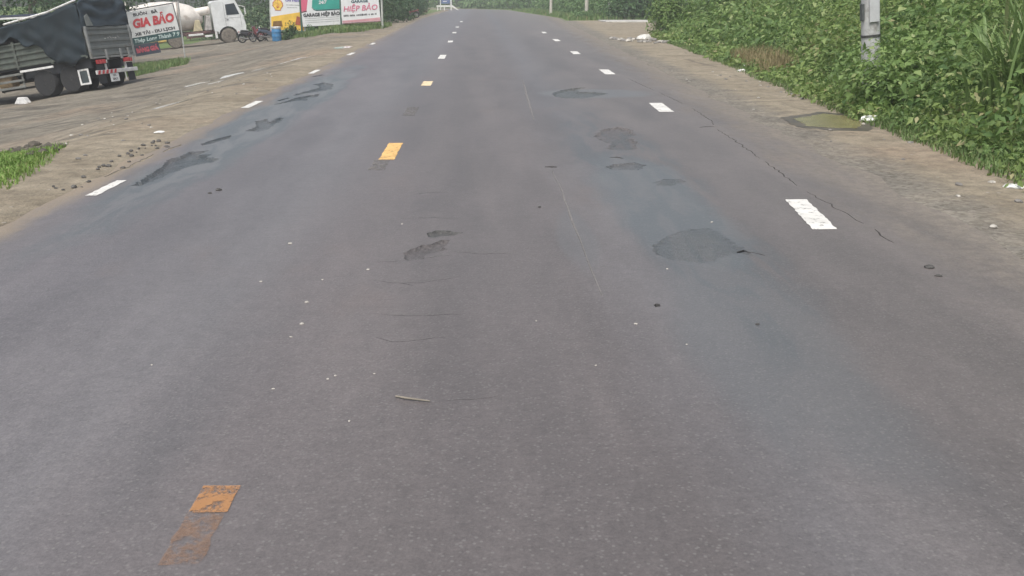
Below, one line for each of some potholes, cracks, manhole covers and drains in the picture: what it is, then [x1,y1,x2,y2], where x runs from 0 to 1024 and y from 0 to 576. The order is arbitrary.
pothole [427,230,463,238]
pothole [552,87,608,98]
pothole [247,117,283,132]
pothole [277,94,320,104]
pothole [594,127,638,151]
pothole [294,82,334,96]
pothole [131,150,221,186]
pothole [403,240,450,261]
